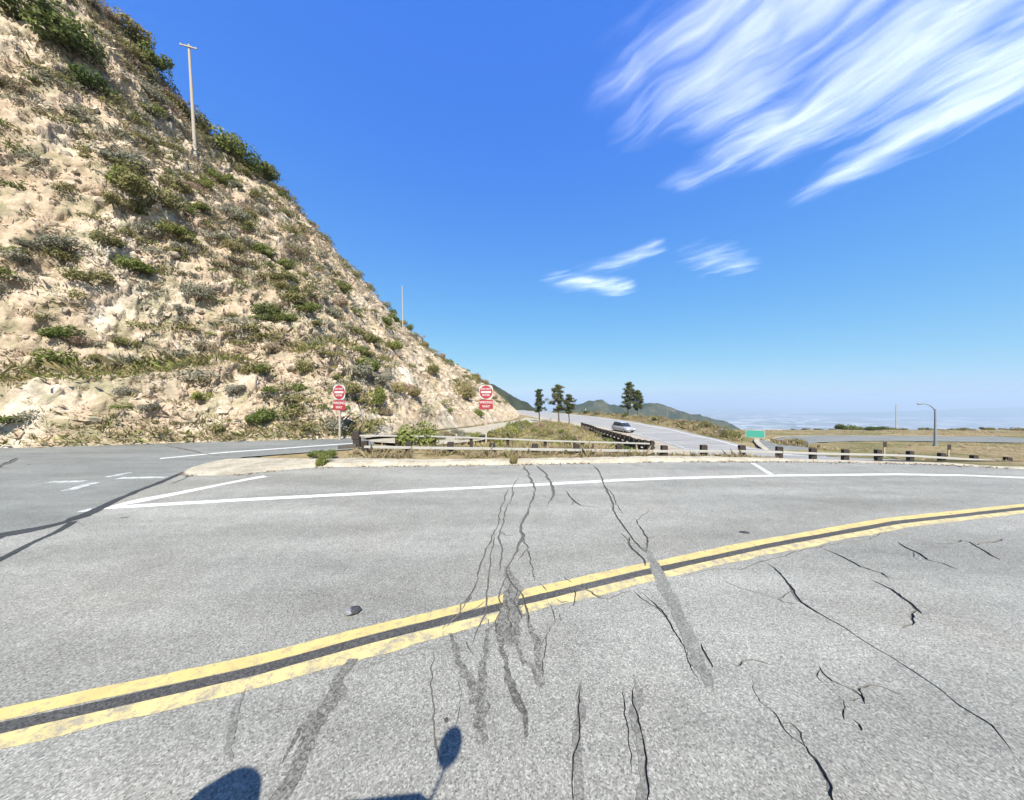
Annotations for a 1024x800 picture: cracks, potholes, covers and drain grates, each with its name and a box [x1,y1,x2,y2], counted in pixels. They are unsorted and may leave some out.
crack [355,466,1022,800]
